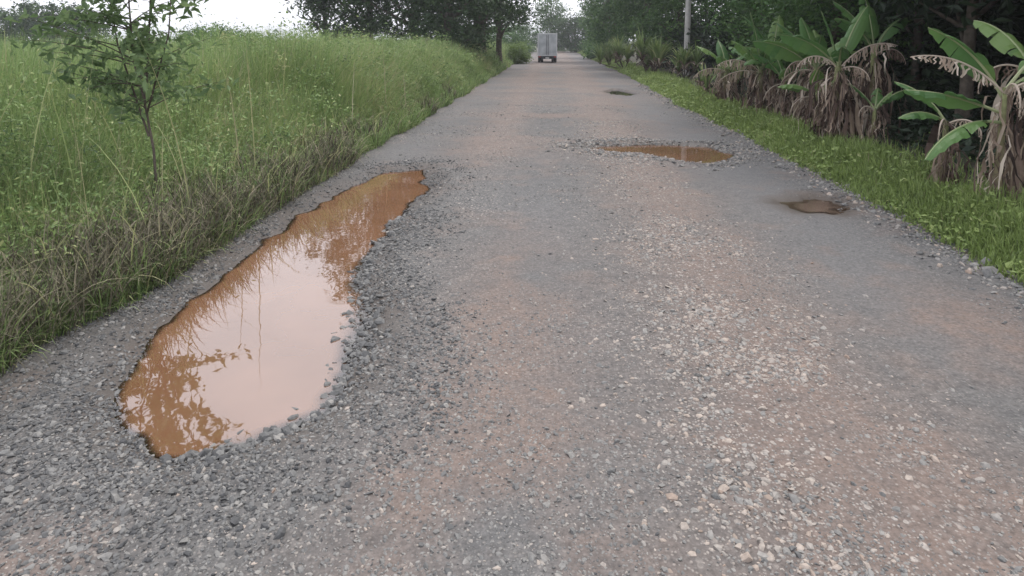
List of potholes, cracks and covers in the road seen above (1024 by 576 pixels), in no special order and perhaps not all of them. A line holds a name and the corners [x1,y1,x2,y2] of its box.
pothole [599,88,645,96]
pothole [753,189,883,219]
pothole [45,162,454,496]
pothole [567,140,753,166]
